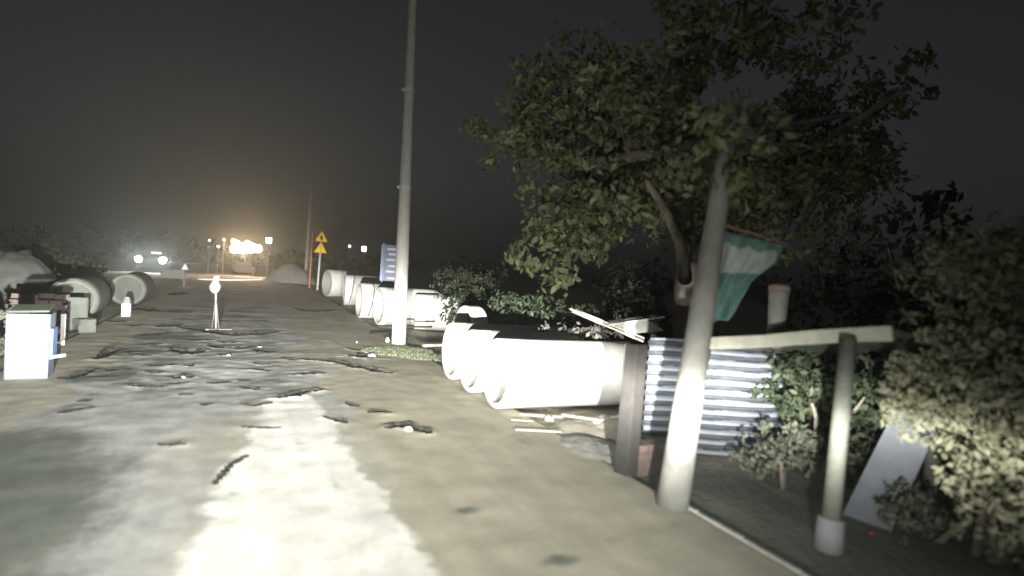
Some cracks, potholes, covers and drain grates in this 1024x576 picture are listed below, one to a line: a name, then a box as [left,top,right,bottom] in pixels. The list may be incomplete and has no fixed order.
pothole [384,422,433,434]
pothole [167,347,211,355]
